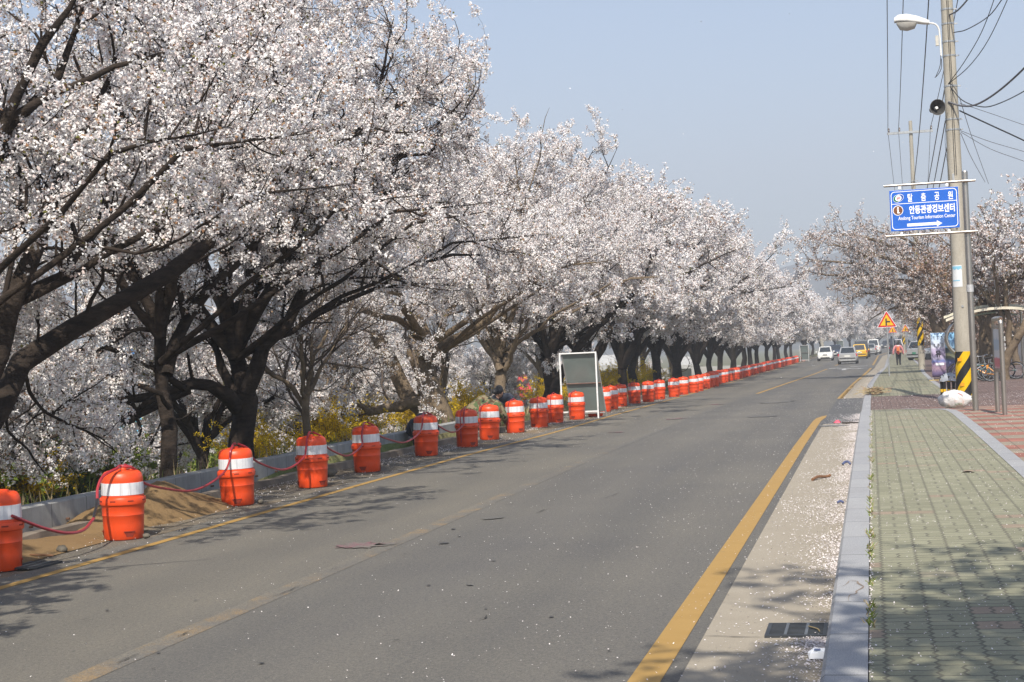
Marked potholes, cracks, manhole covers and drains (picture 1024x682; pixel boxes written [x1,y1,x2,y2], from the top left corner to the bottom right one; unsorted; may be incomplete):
drain grate [764,622,828,638]
